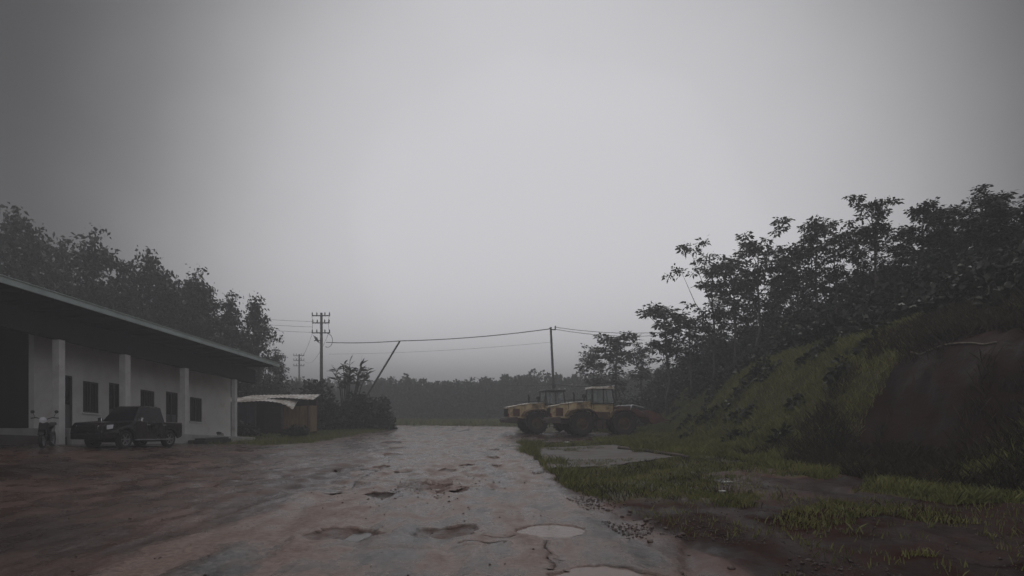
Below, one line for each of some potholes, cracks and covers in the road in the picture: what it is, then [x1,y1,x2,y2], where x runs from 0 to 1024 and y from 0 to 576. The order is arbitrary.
pothole [383,478,467,495]
crack [462,533,571,572]
pothole [399,522,487,542]
pothole [287,524,393,544]
pothole [351,488,410,500]
pothole [534,561,679,576]
pothole [423,485,477,495]
pothole [505,522,596,540]
